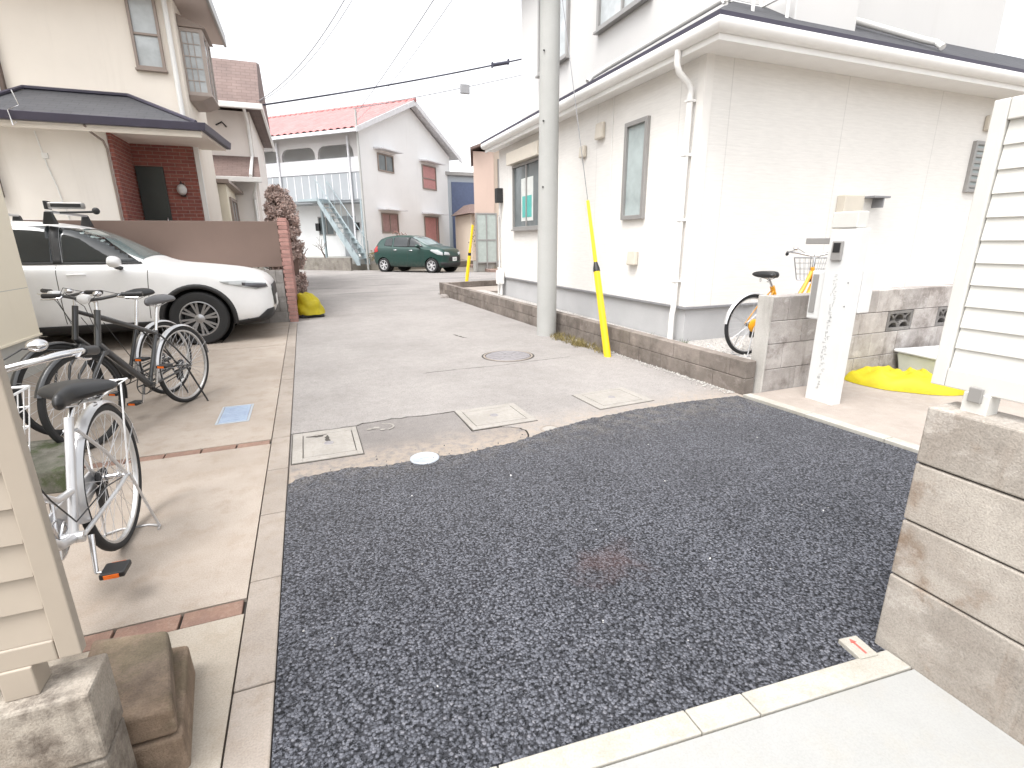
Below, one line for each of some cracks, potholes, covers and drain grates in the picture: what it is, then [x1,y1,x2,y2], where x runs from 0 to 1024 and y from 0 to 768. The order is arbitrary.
manhole cover [454,403,538,431]
manhole cover [410,452,439,465]
manhole cover [482,350,534,362]
manhole cover [291,426,364,465]
manhole cover [215,404,254,425]
manhole cover [572,387,654,410]
